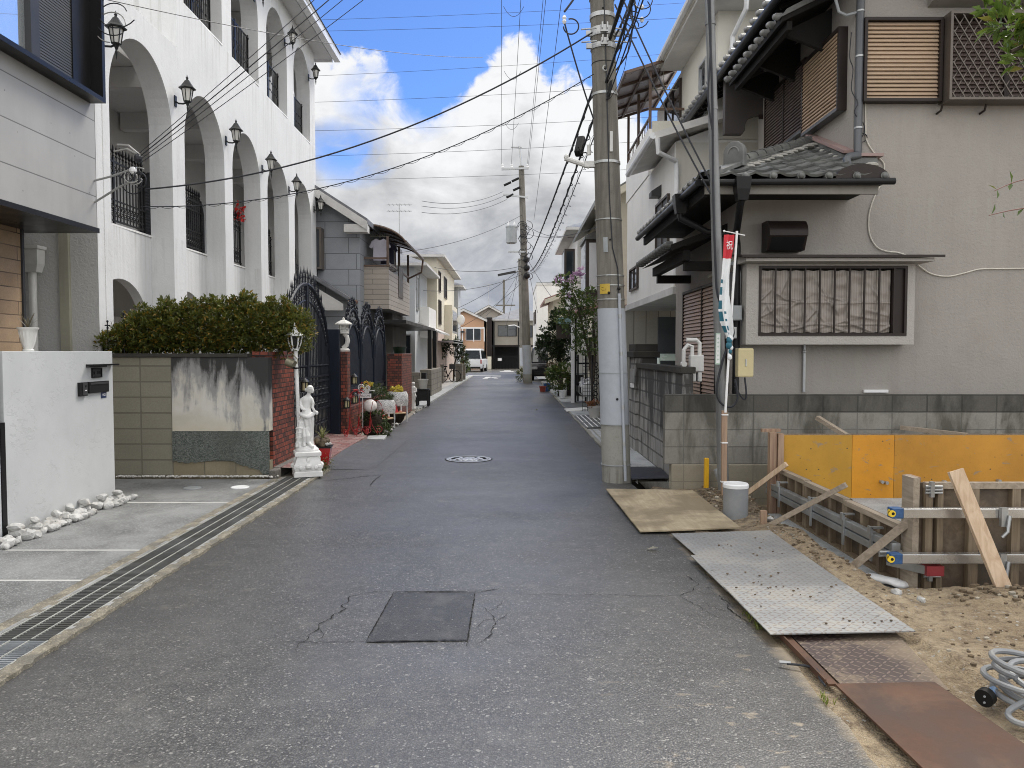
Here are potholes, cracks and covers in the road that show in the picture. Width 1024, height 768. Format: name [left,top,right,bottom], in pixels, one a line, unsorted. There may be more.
drain grate [0,640,49,670]
drain grate [85,552,190,589]
drain grate [0,588,132,641]
drain grate [262,477,310,490]
drain grate [233,490,289,506]
crack [277,591,389,646]
drain grate [197,506,264,526]
drain grate [150,526,232,553]
